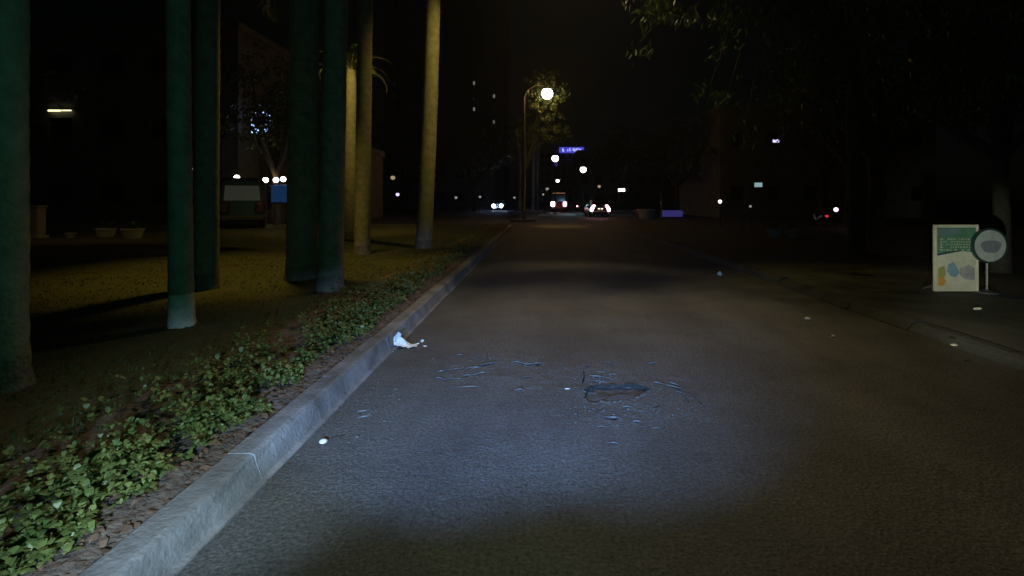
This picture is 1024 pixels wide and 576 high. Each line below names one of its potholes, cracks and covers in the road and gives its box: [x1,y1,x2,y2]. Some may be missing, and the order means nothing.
crack [432,352,543,392]
pothole [581,384,652,405]
crack [582,361,707,445]
